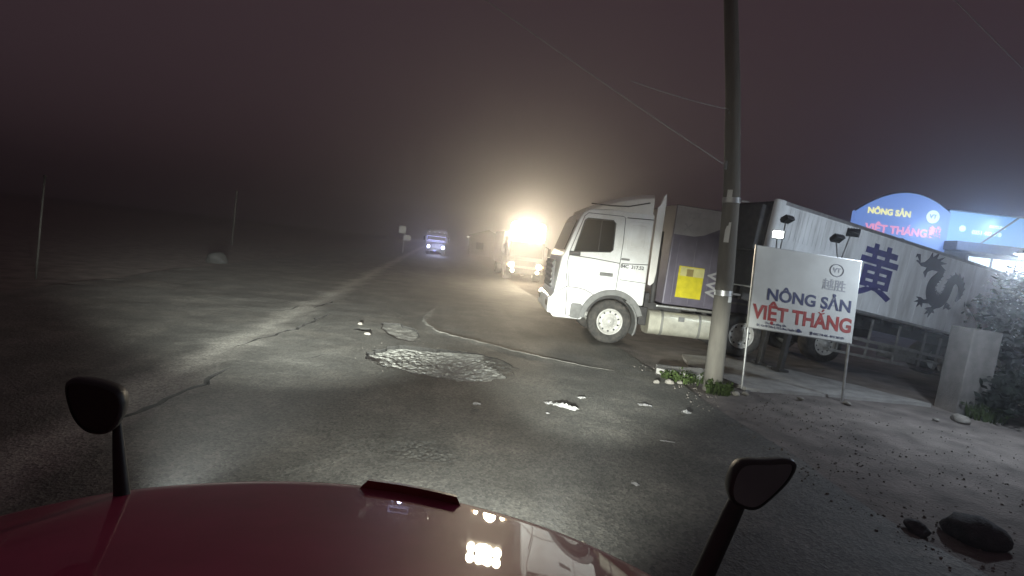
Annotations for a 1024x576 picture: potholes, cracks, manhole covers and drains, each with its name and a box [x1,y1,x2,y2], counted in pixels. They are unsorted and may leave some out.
crack [124,368,229,418]
pothole [365,345,520,382]
crack [235,302,332,347]
pothole [381,322,420,341]
